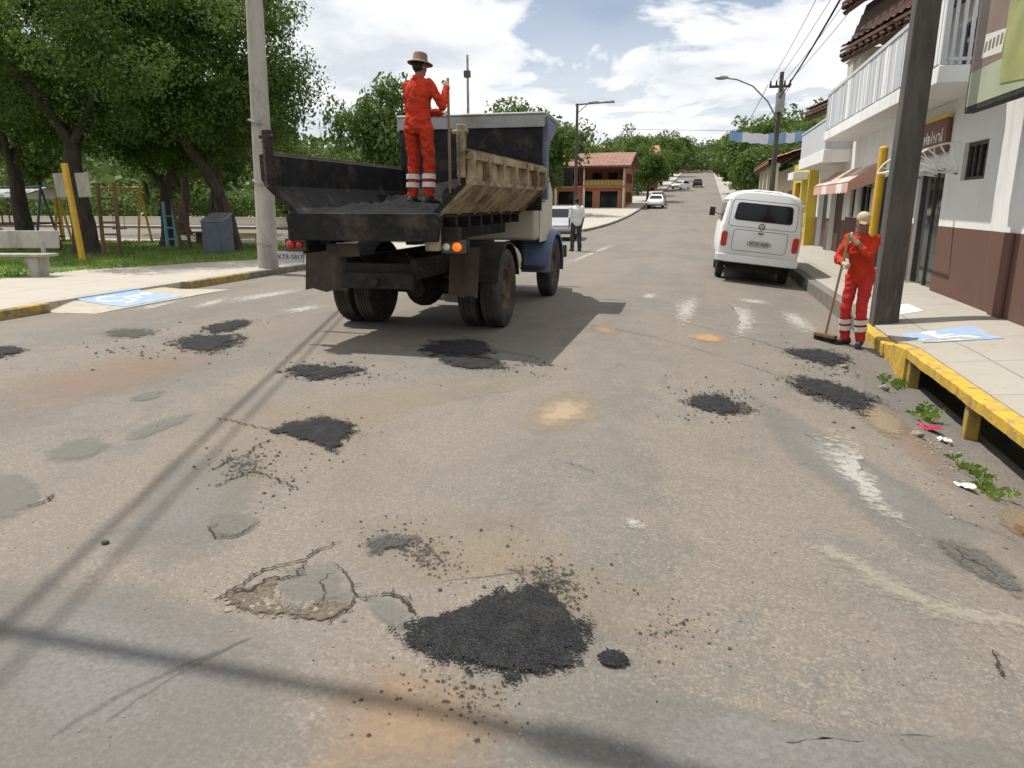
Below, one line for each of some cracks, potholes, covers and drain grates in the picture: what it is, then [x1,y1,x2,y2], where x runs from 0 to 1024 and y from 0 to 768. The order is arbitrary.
crack [213,418,298,488]
pothole [292,601,351,620]
pothole [226,576,291,614]
